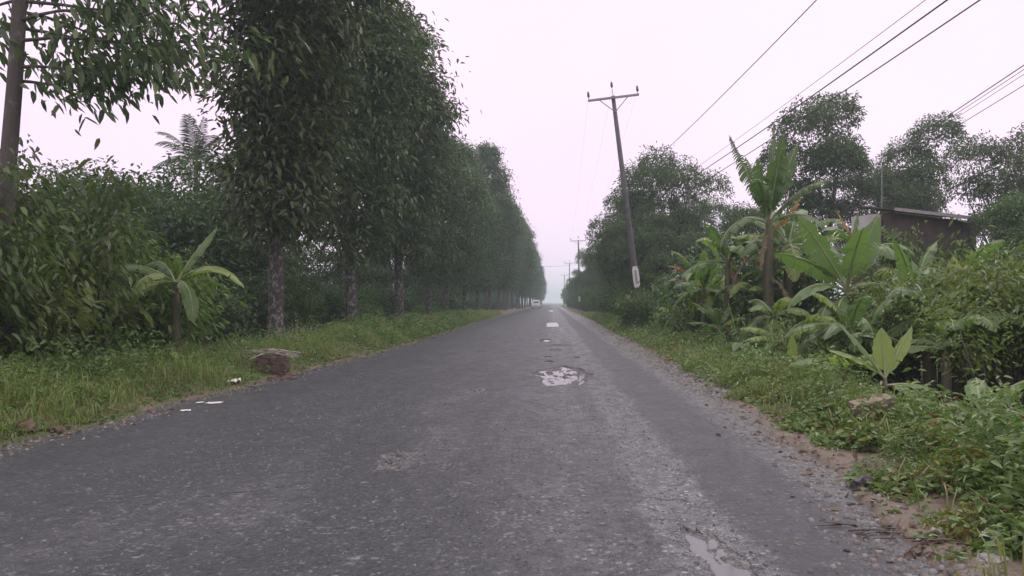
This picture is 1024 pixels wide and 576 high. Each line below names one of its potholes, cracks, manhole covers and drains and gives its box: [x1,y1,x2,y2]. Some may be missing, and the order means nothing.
pothole [680,524,758,576]
pothole [530,365,595,386]
pothole [376,450,426,471]
